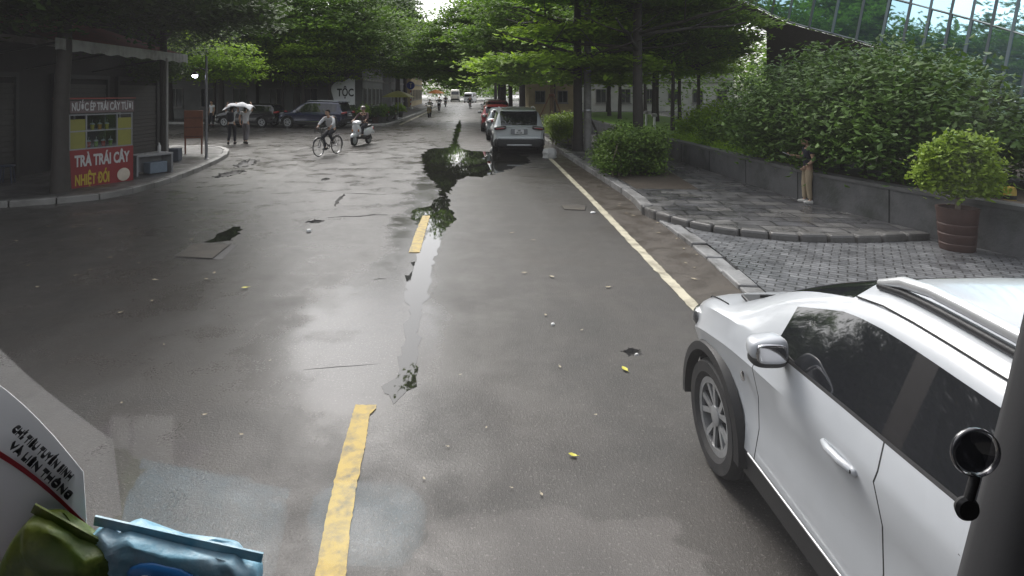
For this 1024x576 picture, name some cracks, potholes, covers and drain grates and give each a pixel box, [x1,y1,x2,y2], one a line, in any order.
manhole cover [173,243,239,260]
pothole [620,347,642,357]
crack [329,193,376,218]
